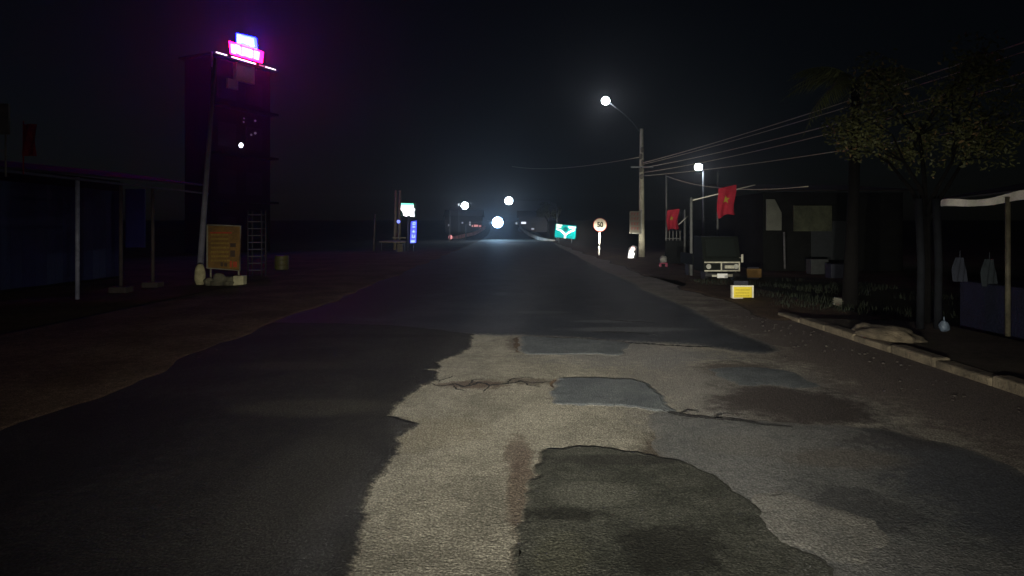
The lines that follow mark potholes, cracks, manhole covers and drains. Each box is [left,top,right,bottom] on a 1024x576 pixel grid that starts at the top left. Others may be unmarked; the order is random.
crack [432,377,550,391]
crack [657,403,790,427]
